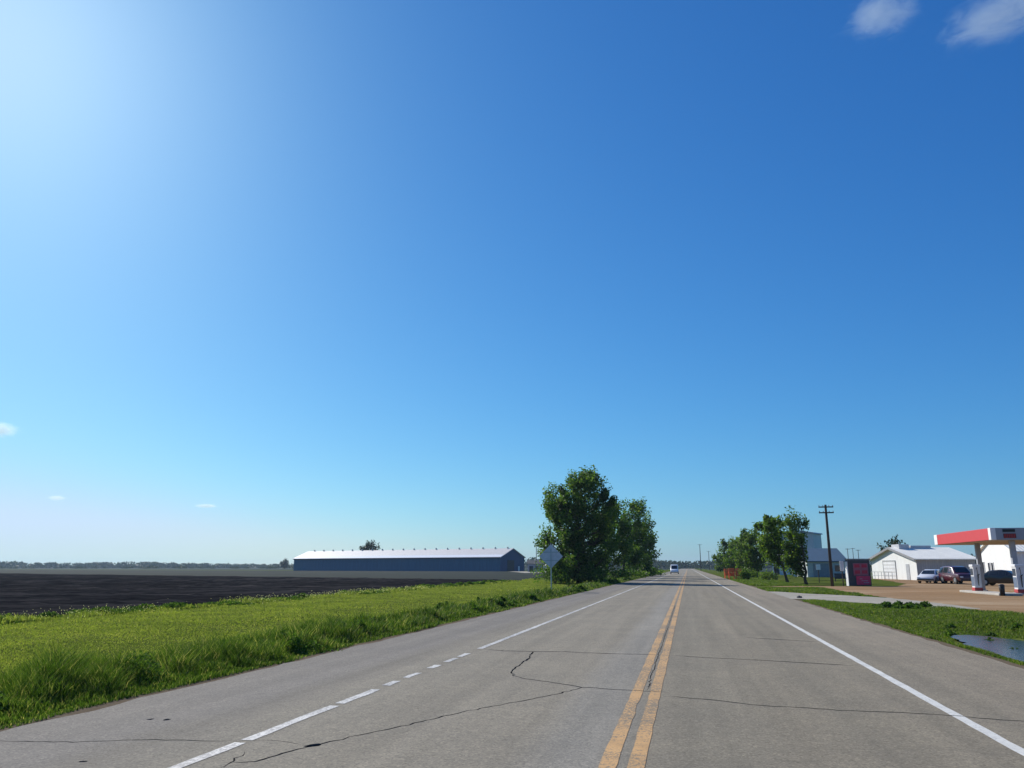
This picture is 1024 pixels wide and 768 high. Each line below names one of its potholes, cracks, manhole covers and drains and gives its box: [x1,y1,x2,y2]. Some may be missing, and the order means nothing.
crack [223,649,649,767]
